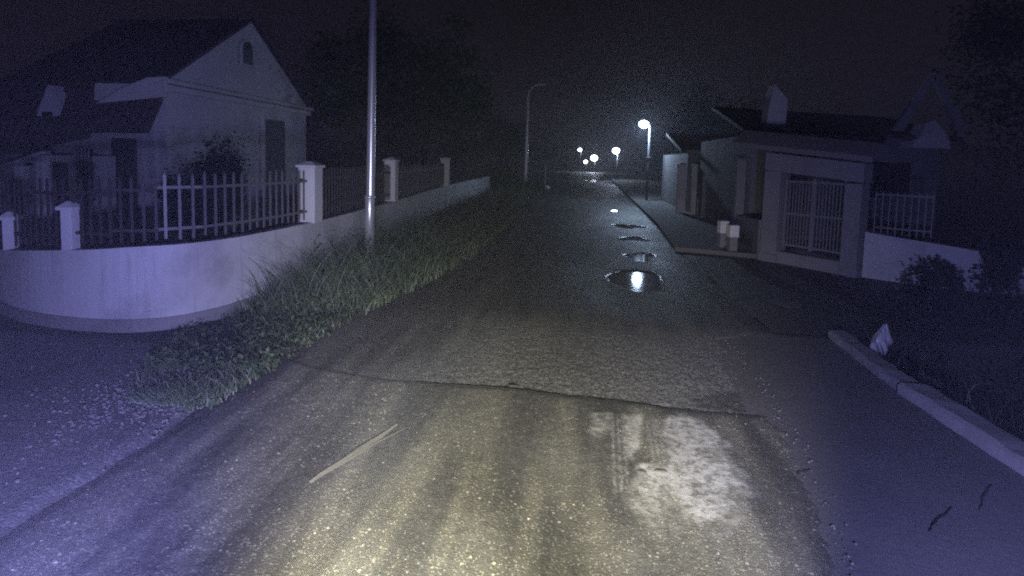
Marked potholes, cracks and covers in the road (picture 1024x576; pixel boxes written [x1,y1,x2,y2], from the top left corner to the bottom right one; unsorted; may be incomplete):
pothole [621,252,658,262]
crack [979,484,992,510]
crack [929,507,953,532]
pothole [603,270,666,294]
